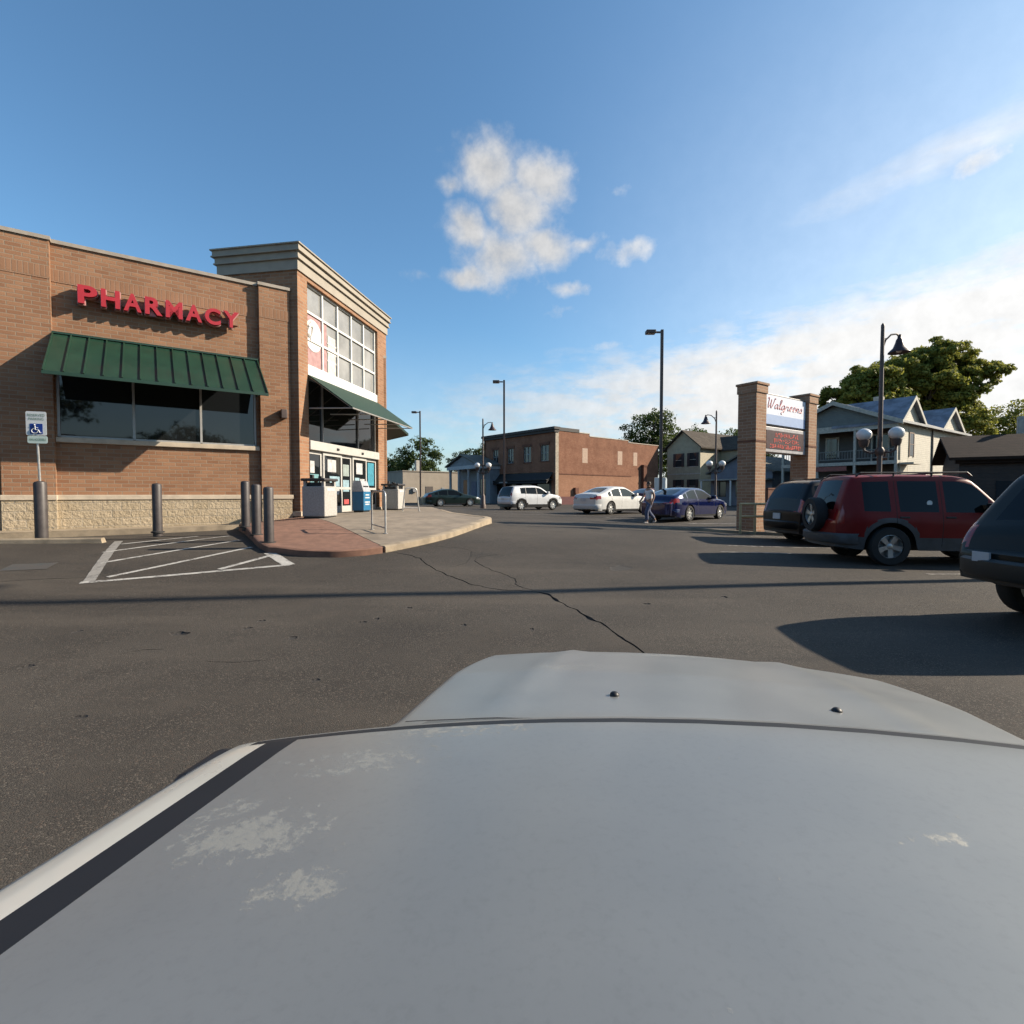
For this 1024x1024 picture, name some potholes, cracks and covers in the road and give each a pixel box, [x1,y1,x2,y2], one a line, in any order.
crack [394,546,644,653]
